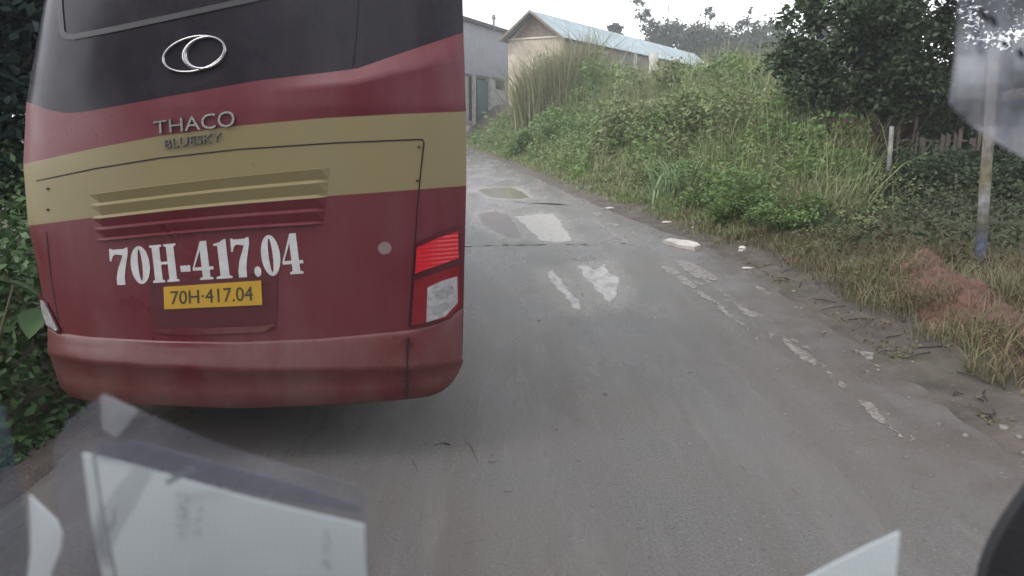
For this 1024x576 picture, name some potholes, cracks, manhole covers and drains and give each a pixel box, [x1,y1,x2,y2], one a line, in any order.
pothole [476,186,532,199]
